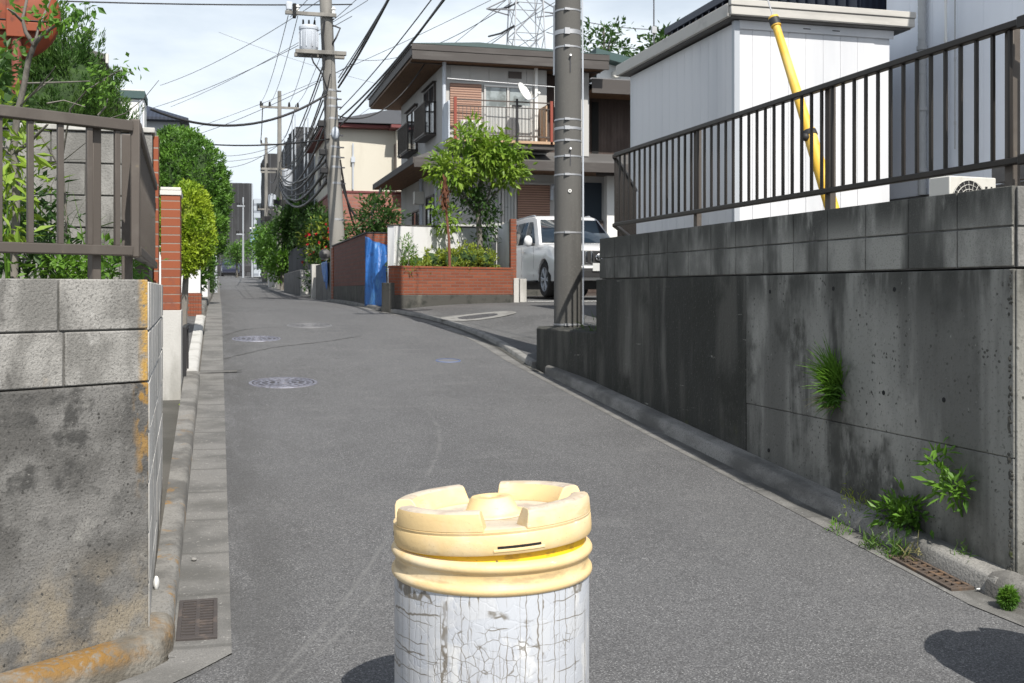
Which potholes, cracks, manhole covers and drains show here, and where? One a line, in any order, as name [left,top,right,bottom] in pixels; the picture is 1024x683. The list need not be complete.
manhole cover [439,311,516,321]
drain grate [176,598,218,641]
manhole cover [248,377,318,388]
drain grate [888,554,974,591]
